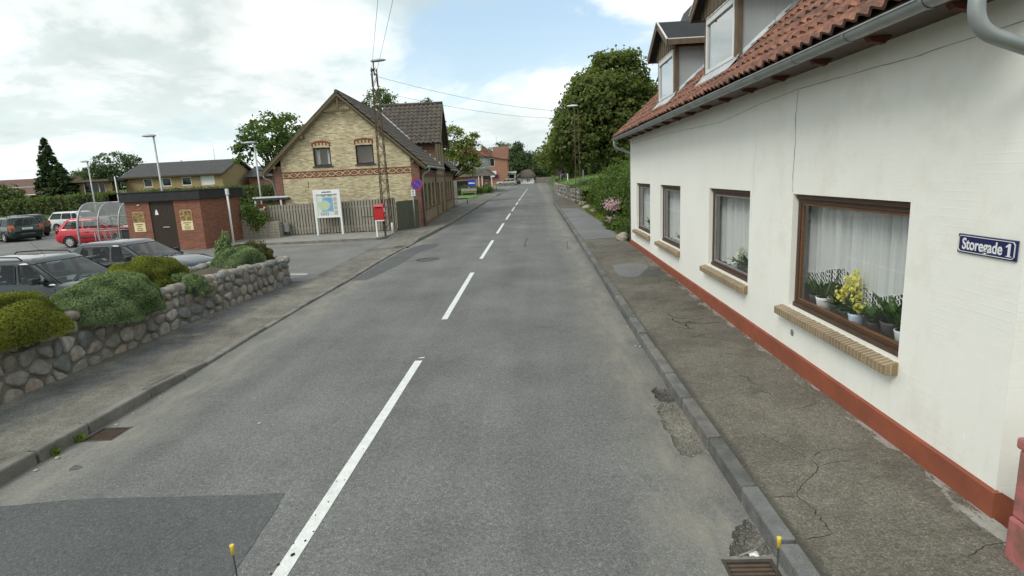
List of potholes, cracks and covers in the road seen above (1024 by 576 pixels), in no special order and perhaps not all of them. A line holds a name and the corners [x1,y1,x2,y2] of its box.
pothole [728,519,772,557]
pothole [651,387,675,403]
drain grate [721,559,782,576]
crack [969,542,1006,556]
crack [760,432,860,539]
drain grate [80,427,132,442]
pothole [654,404,708,458]
crack [641,279,717,338]
